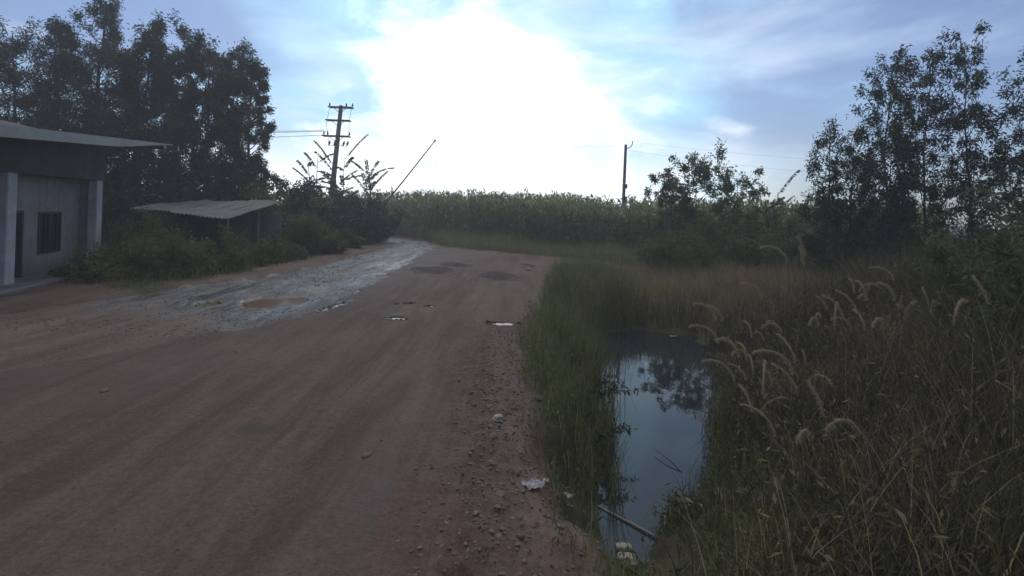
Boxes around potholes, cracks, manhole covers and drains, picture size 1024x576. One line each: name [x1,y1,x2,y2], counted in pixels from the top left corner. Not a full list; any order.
pothole [314,300,353,313]
pothole [234,295,313,309]
pothole [477,271,518,281]
pothole [410,266,455,274]
